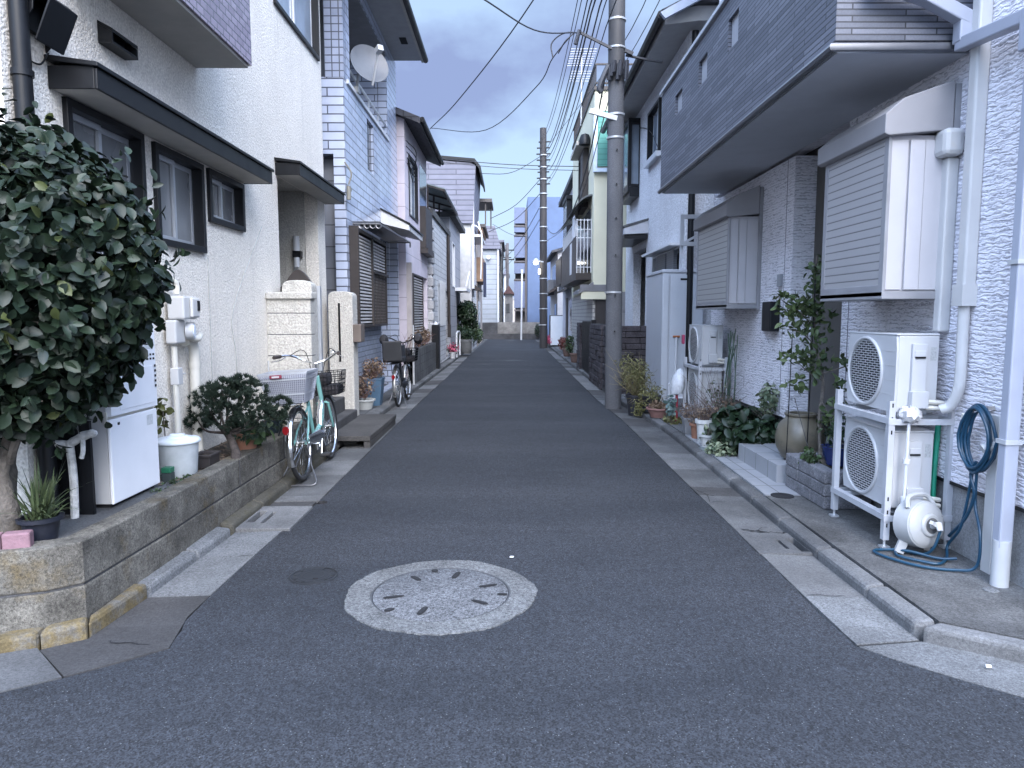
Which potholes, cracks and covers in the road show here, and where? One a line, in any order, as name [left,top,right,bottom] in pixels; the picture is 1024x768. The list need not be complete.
manhole cover [344,560,538,636]
drain grate [739,533,813,556]
manhole cover [288,567,338,585]
drain grate [236,506,313,533]
